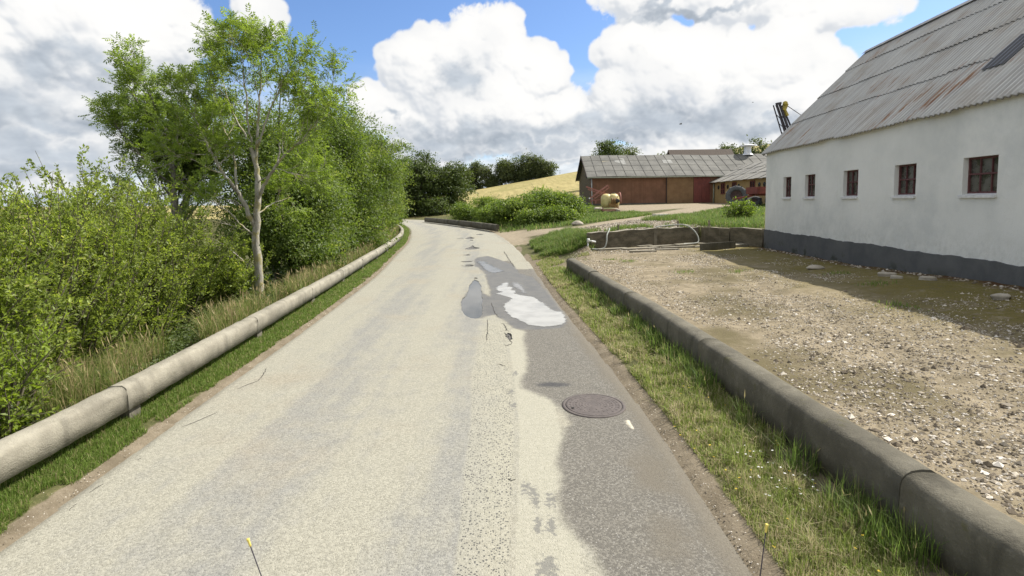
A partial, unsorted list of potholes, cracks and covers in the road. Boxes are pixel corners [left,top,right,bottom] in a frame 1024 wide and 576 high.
manhole cover [562,394,626,418]
